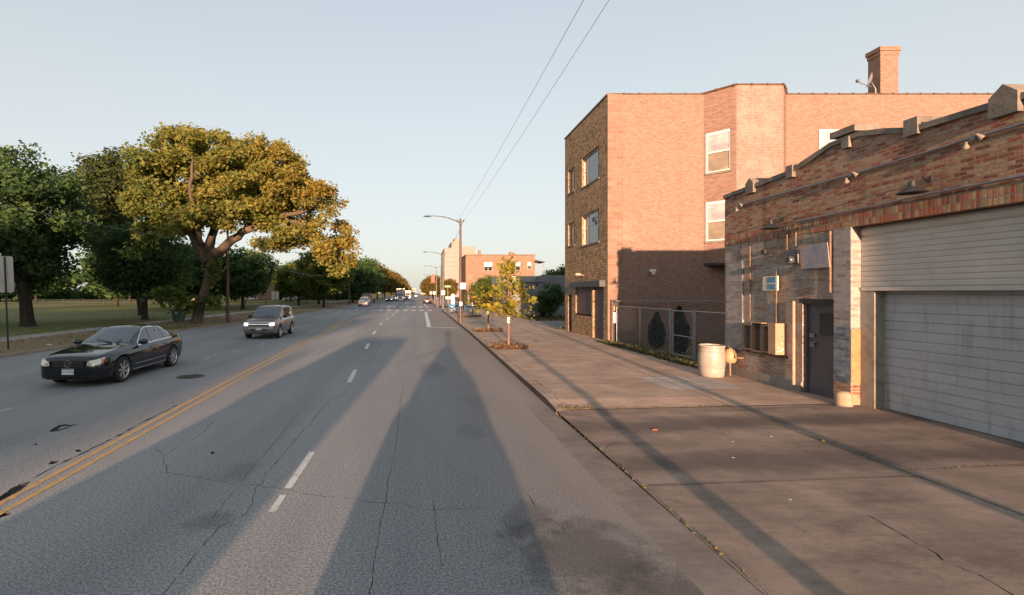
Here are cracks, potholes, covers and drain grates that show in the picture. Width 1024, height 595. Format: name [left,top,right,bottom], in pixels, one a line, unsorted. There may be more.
pothole [0,481,30,501]
crack [155,362,469,595]
crack [868,515,1014,595]
